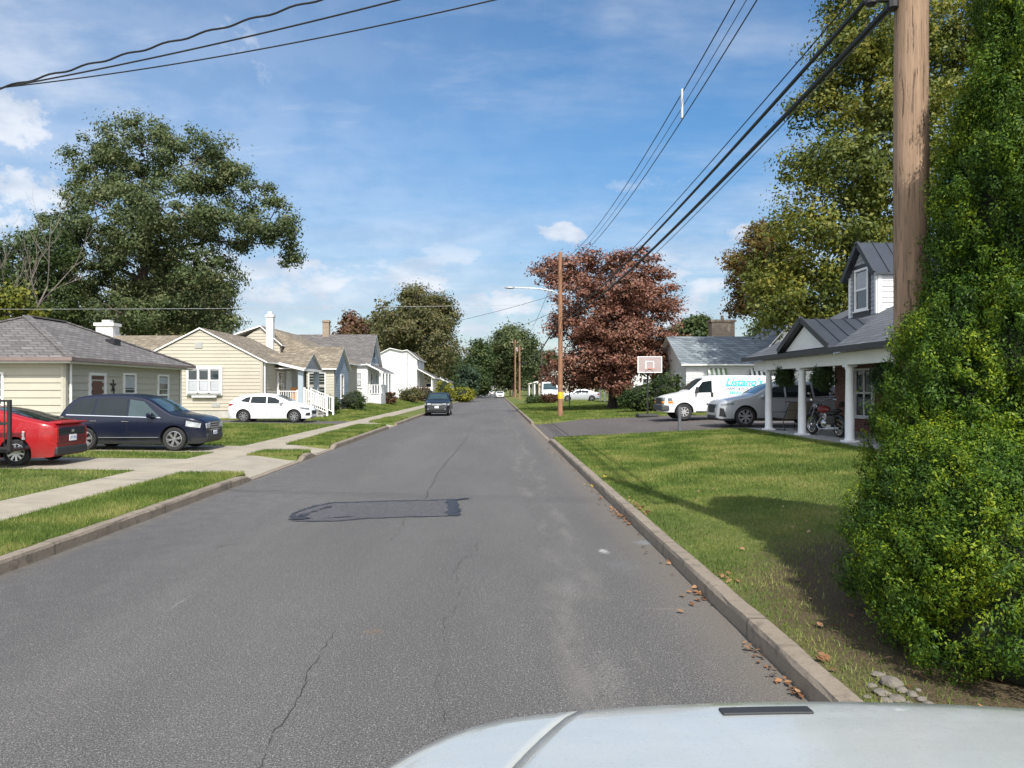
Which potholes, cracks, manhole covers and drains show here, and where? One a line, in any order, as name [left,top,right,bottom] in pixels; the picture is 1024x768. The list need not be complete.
crack [259,630,336,768]
crack [389,524,478,723]
